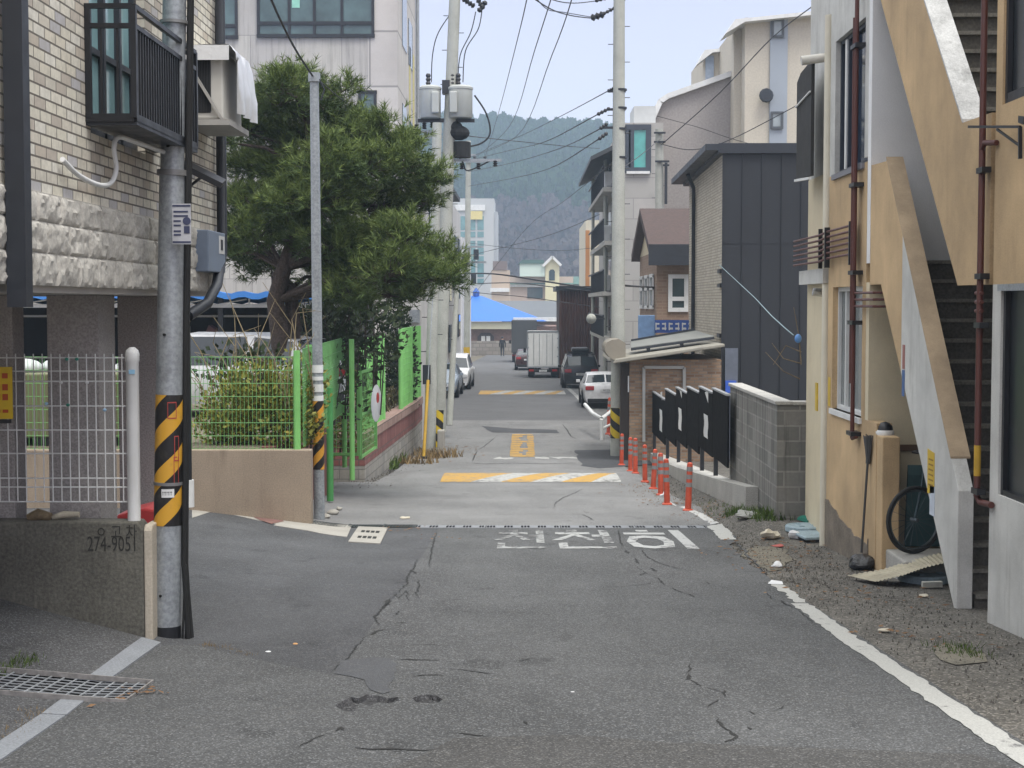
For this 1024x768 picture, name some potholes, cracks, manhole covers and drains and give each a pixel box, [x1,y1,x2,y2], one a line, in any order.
crack [685,664,784,742]
pothole [412,694,443,703]
drain grate [0,667,154,702]
crack [330,531,575,673]
crack [299,727,435,751]
crack [595,530,763,597]
pothole [336,694,399,711]
